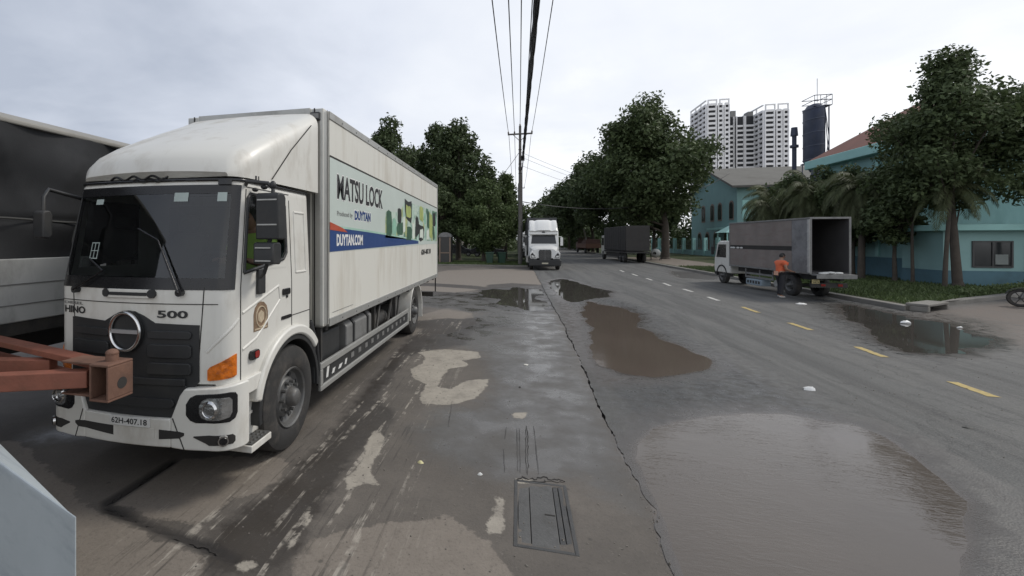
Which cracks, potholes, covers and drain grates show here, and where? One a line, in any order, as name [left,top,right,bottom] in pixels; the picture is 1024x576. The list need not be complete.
manhole cover [513,479,580,557]
crack [503,426,563,482]
crack [547,296,613,434]
